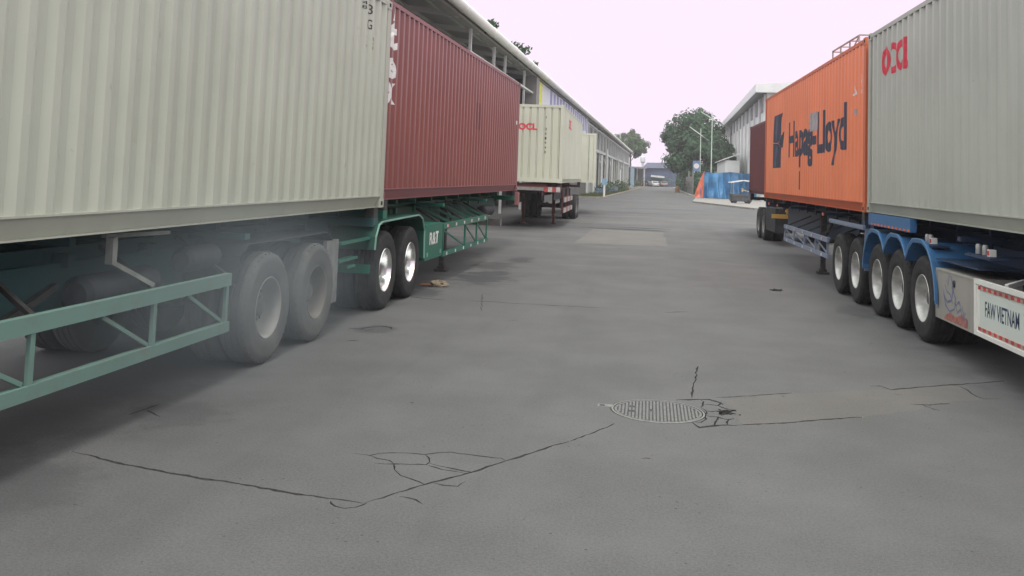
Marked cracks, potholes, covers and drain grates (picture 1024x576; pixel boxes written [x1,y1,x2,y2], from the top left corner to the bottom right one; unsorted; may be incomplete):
crack [71,424,613,509]
crack [679,366,859,428]
manhole cover [597,399,706,424]
